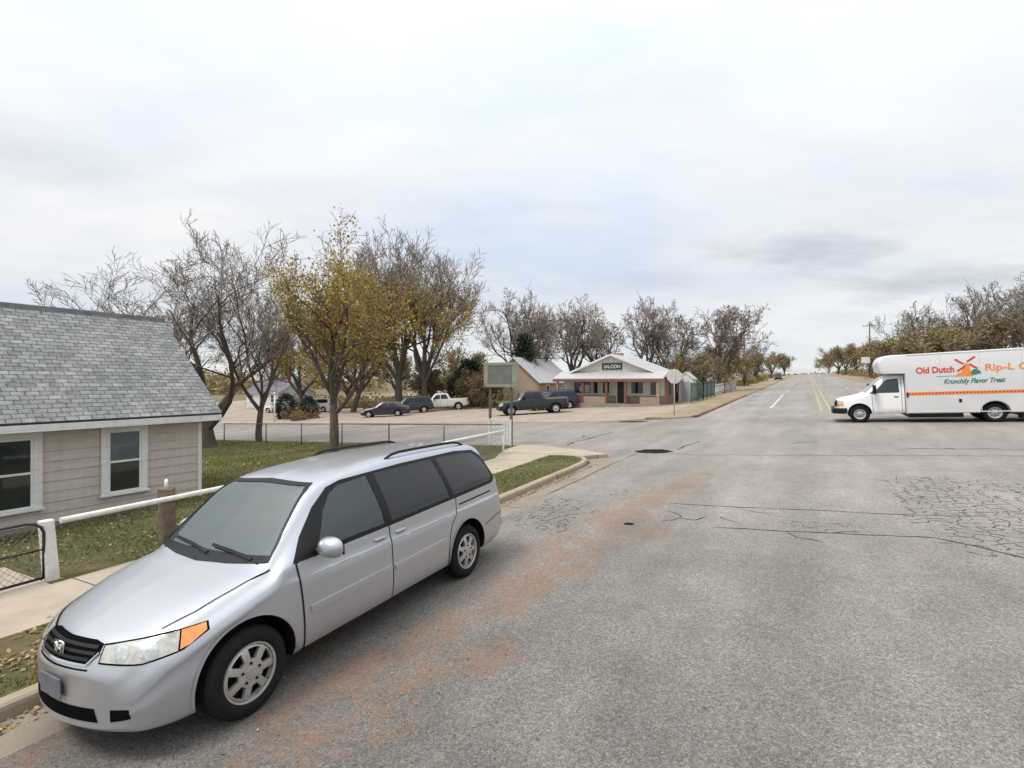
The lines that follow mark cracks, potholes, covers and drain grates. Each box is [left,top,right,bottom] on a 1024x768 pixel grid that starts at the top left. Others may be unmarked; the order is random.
crack [516,453,637,532]
crack [661,476,1024,558]
